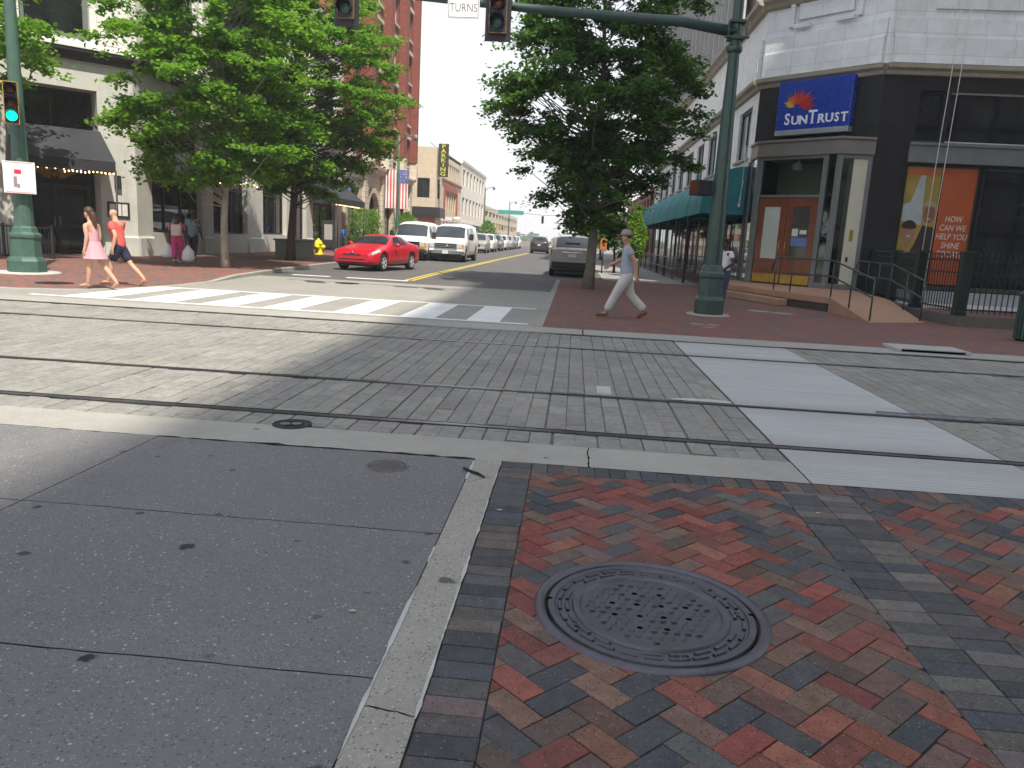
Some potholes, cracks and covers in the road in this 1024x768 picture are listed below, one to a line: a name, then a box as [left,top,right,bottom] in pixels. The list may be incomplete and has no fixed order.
manhole cover [272,419,312,429]
manhole cover [365,459,409,473]
manhole cover [534,561,772,677]
drain grate [882,343,1006,361]
